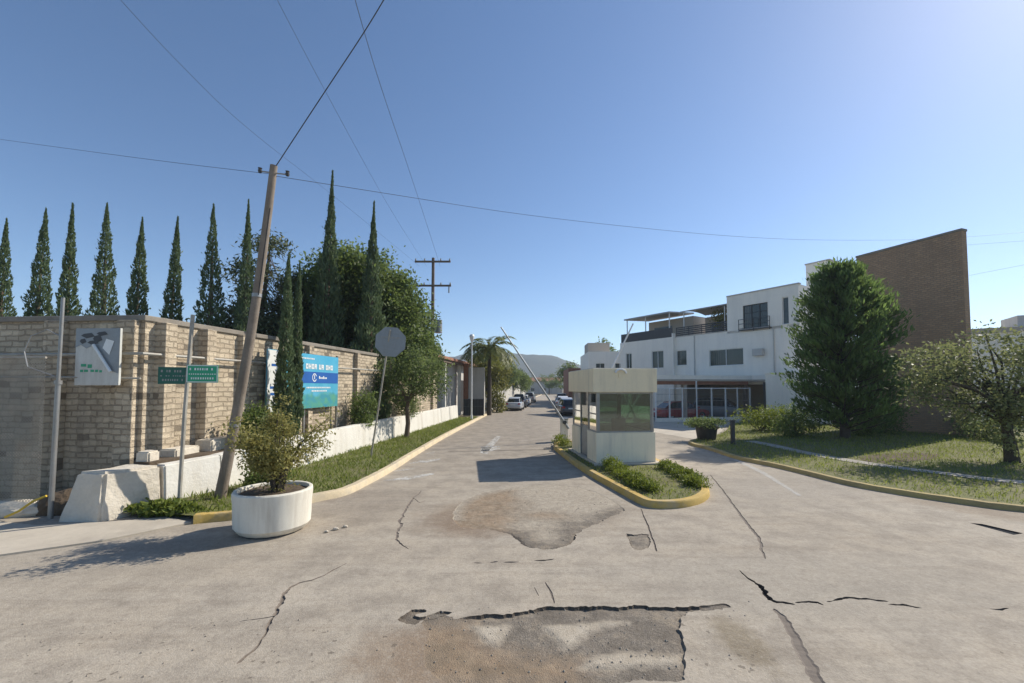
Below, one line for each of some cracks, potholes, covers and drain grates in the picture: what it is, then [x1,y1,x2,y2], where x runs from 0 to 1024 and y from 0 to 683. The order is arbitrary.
crack [395,491,421,549]
pothole [626,533,651,550]
crack [641,509,657,551]
crack [710,475,919,608]
crack [237,564,345,664]
